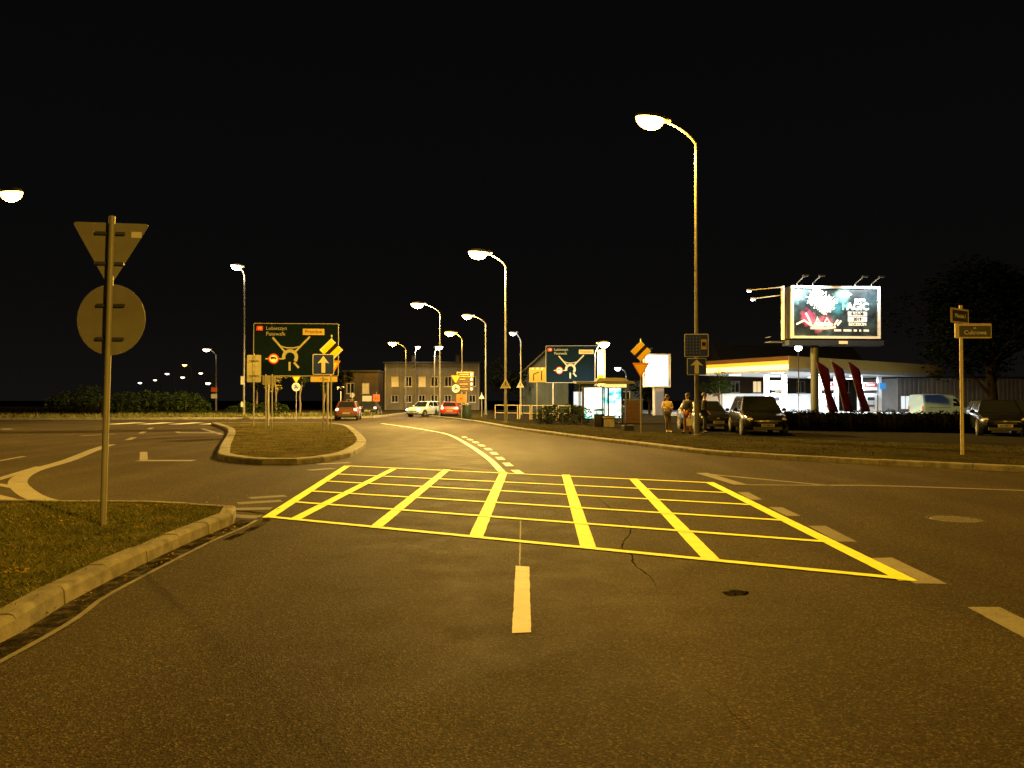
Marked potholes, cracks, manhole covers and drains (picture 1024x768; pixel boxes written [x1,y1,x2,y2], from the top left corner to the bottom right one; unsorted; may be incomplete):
crack [602,501,656,586]
crack [672,643,800,767]
manhole cover [925,515,984,523]
